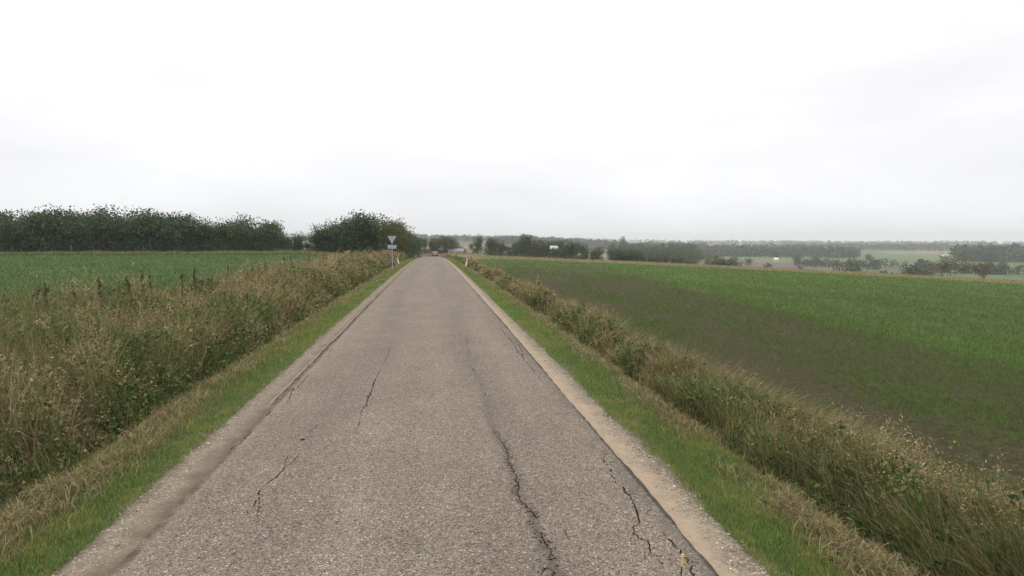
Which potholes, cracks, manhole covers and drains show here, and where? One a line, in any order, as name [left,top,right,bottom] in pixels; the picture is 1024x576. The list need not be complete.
crack [492,430,568,576]
crack [356,353,389,429]
crack [246,454,300,520]
crack [602,451,698,576]
